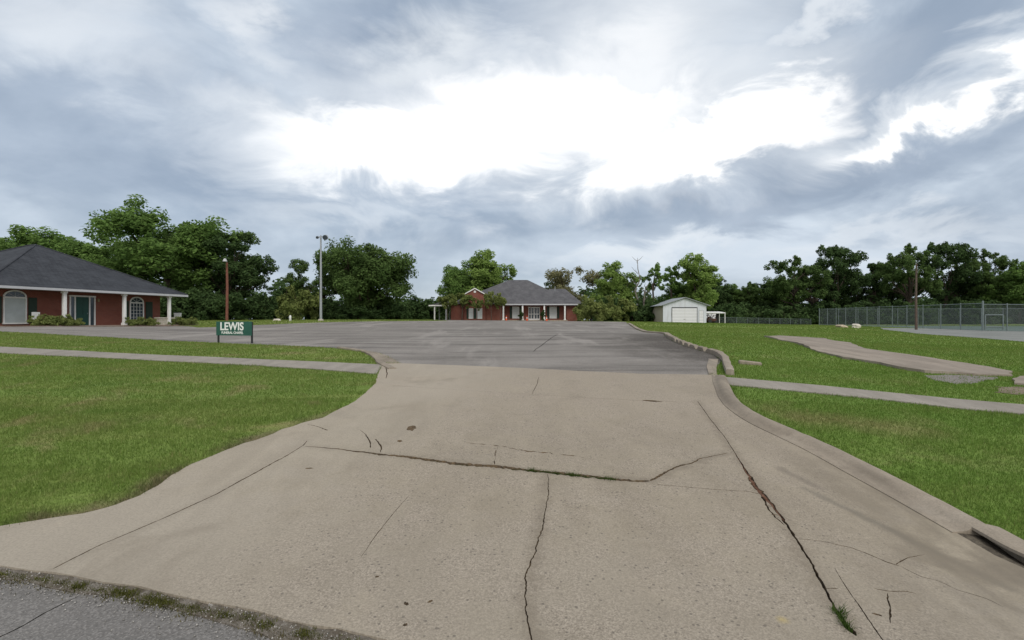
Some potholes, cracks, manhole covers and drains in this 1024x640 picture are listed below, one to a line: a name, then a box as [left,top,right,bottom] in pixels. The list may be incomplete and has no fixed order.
crack [307,402,1001,640]
crack [0,598,74,637]
